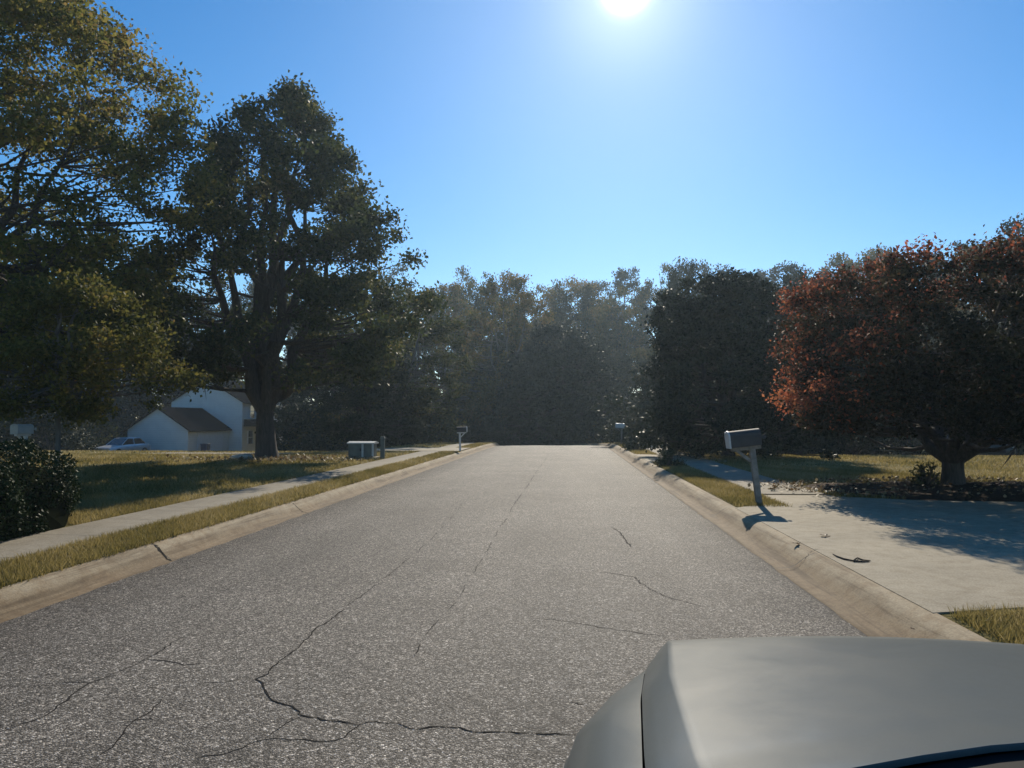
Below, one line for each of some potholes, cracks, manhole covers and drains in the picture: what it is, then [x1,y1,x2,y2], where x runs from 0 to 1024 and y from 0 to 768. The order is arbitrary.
crack [5,637,201,729]
crack [96,696,165,758]
crack [196,504,575,759]
